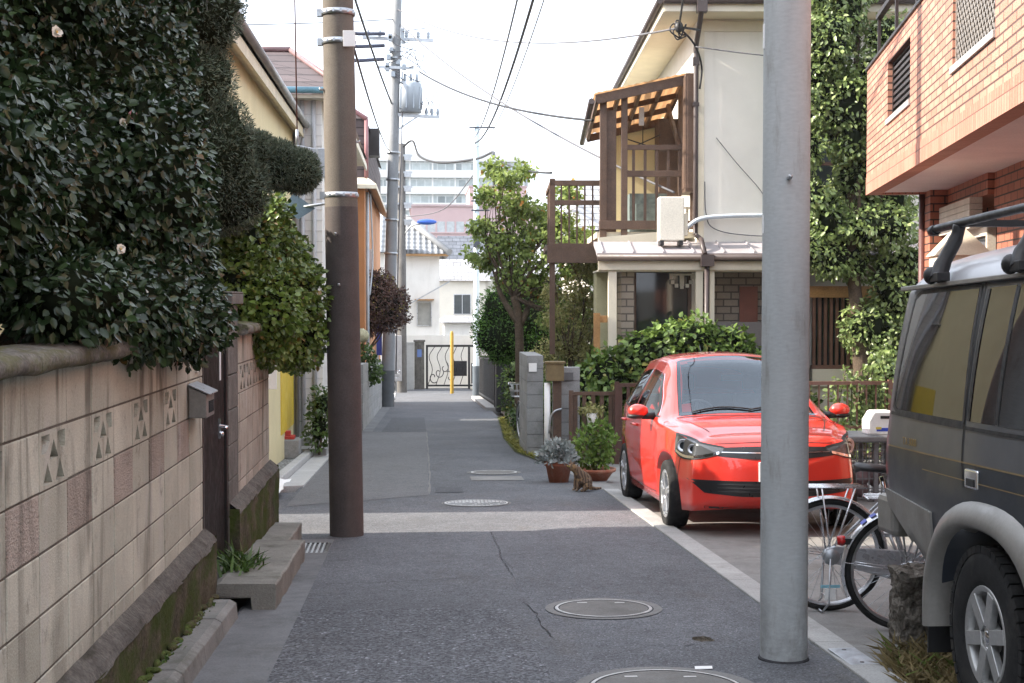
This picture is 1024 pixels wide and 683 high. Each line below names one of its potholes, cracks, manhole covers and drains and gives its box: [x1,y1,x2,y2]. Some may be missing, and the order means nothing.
manhole cover [545,598,662,619]
manhole cover [576,667,753,683]
manhole cover [441,499,511,507]
drain grate [305,542,331,553]
